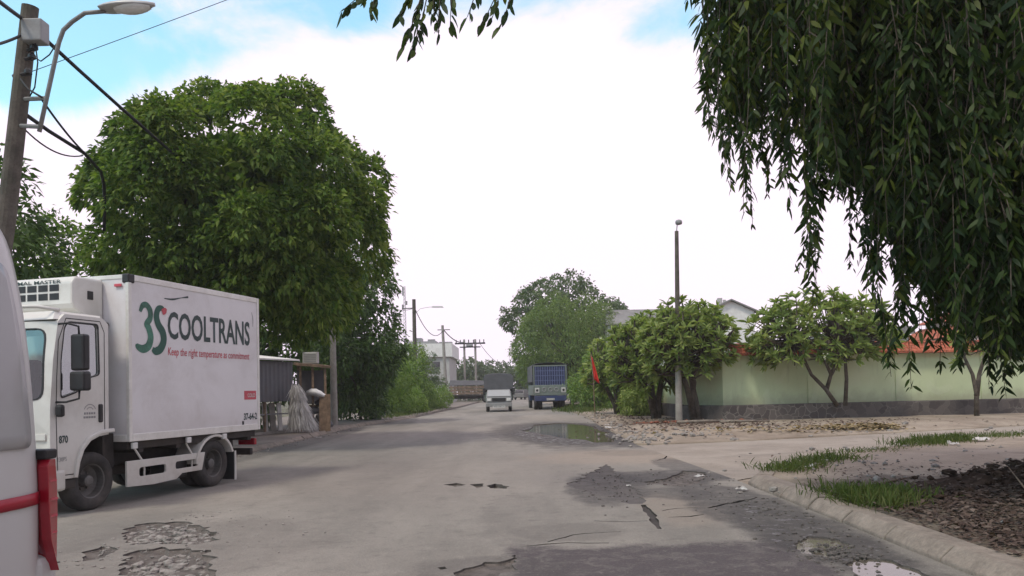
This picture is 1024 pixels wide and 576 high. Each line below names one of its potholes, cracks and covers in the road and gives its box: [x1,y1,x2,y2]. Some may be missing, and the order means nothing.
pothole [82,546,118,561]
crack [531,497,757,546]
pothole [845,557,929,576]
pothole [118,547,218,576]
pothole [122,521,221,545]
